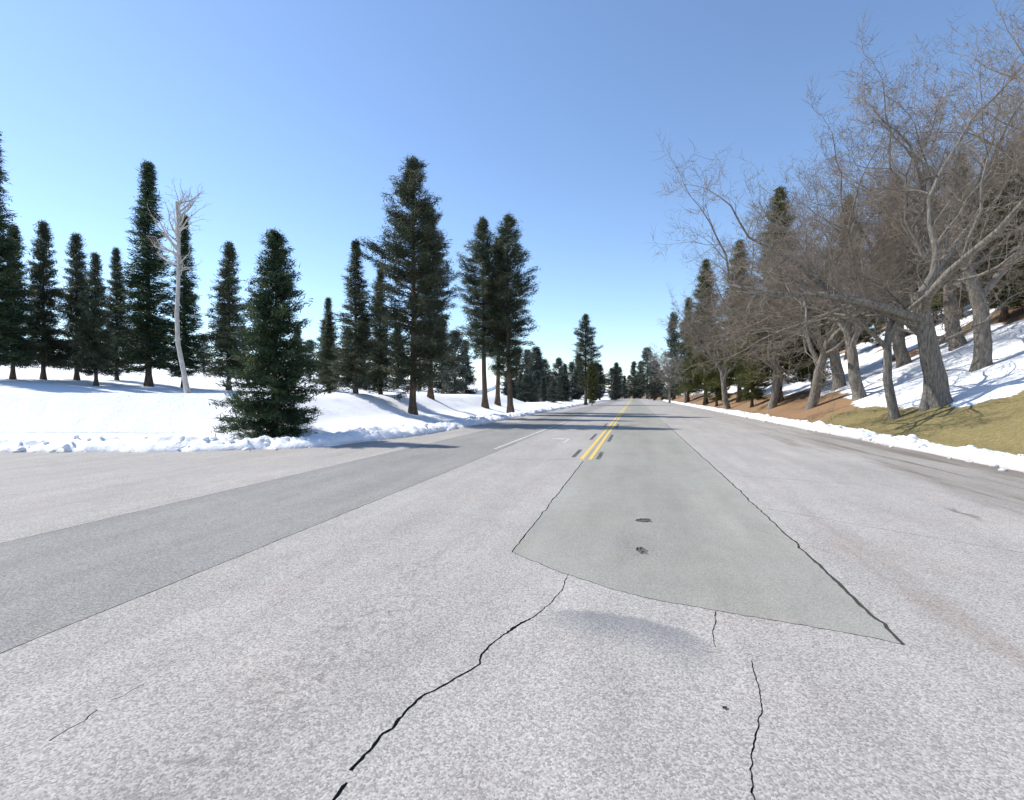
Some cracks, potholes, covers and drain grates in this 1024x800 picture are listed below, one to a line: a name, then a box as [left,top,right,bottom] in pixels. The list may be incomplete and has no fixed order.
crack [49,684,144,741]
crack [332,552,904,800]
